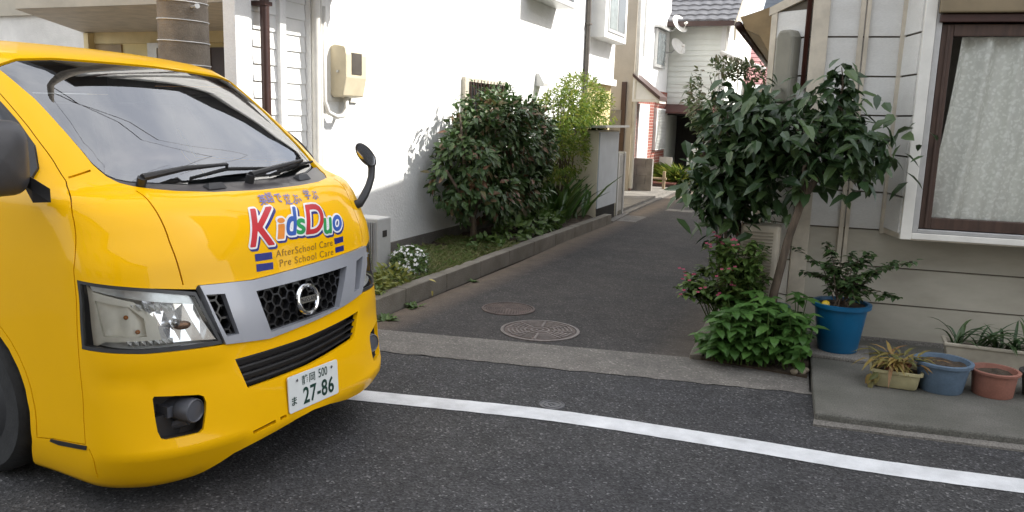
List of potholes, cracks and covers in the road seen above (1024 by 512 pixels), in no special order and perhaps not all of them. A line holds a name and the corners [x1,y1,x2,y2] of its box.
manhole cover [482,302,535,316]
manhole cover [539,400,565,410]
manhole cover [501,320,580,342]
